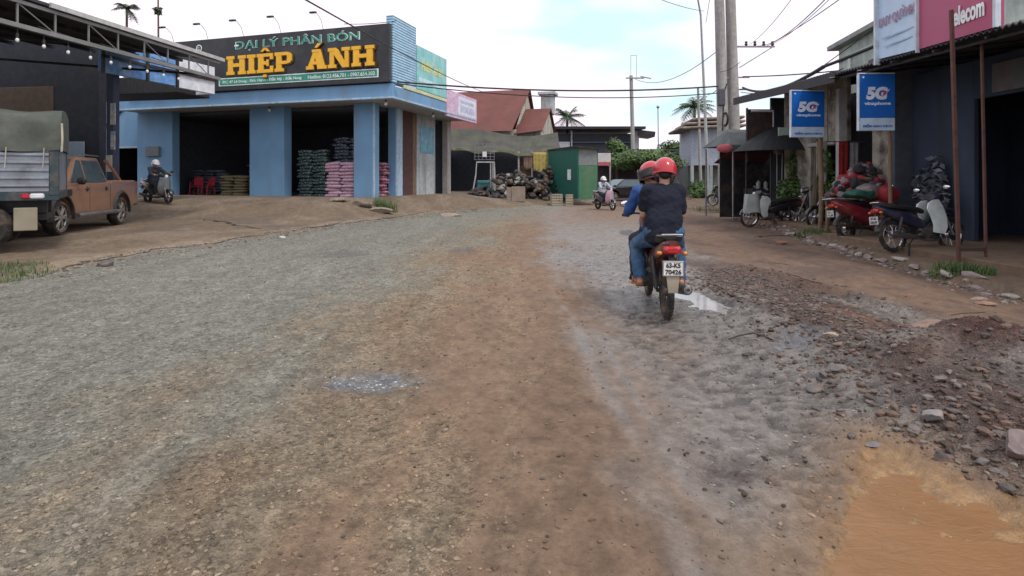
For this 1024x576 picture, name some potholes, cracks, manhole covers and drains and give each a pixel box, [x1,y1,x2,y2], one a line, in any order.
pothole [815,436,1024,576]
pothole [675,290,742,315]
